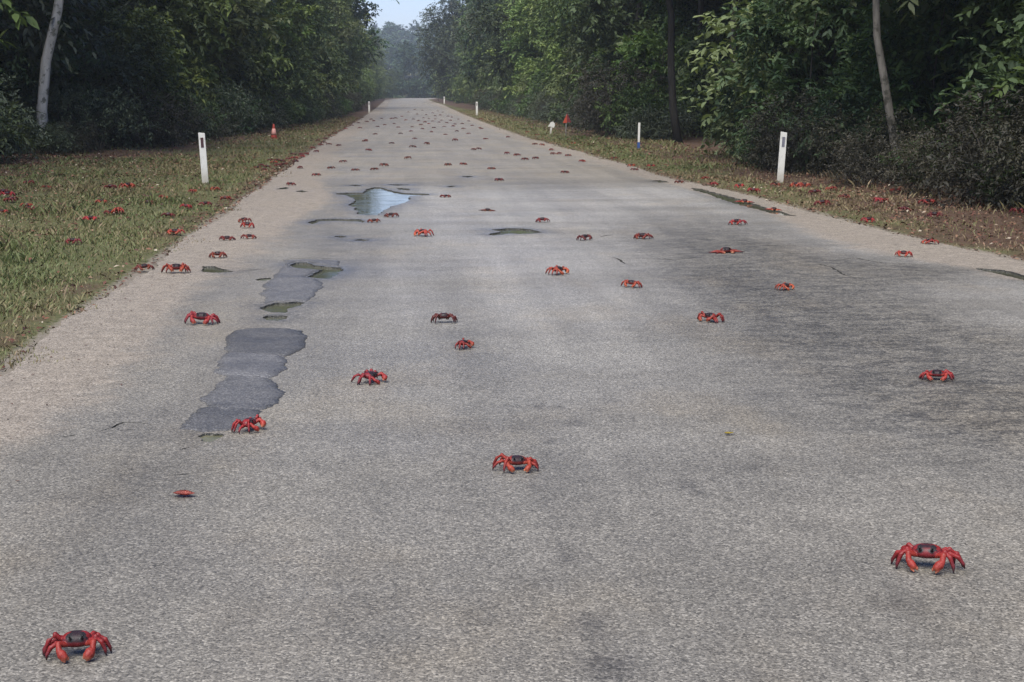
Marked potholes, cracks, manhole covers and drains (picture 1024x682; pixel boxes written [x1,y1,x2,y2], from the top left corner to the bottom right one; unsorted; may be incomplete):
pothole [337,187,429,215]
crack [820,258,923,277]
crack [63,422,151,437]
